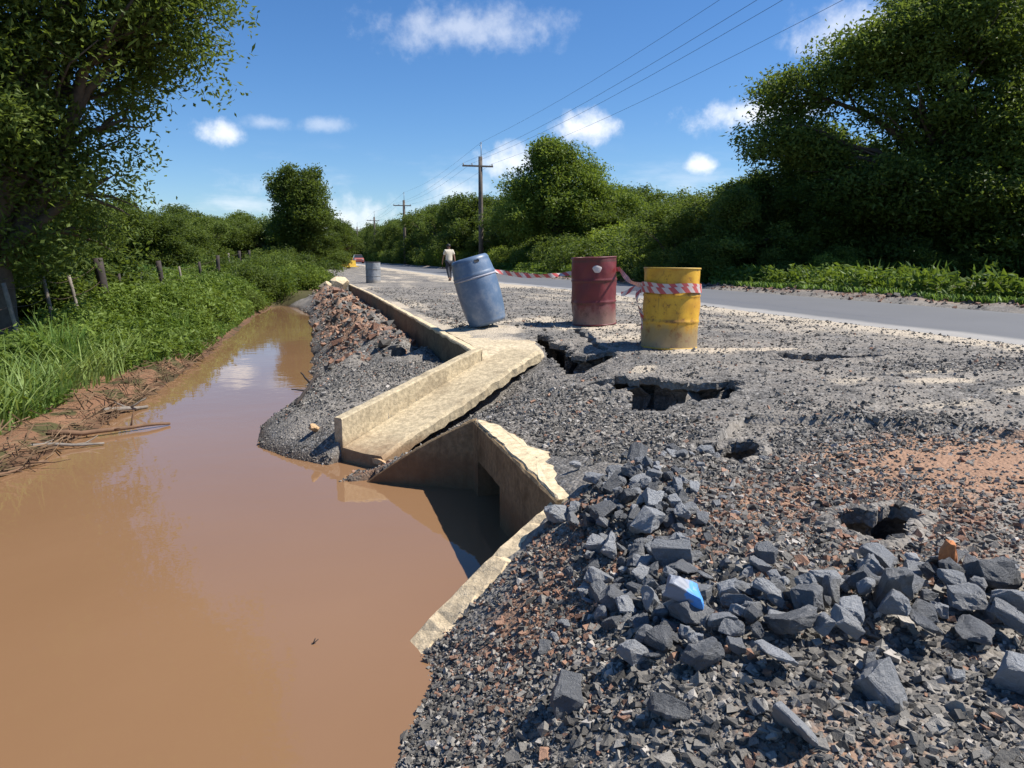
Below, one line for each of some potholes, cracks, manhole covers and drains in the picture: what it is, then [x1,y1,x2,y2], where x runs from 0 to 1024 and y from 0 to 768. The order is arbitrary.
pothole [526,333,625,379]
pothole [816,499,939,550]
pothole [686,436,774,463]
pothole [576,373,751,414]
